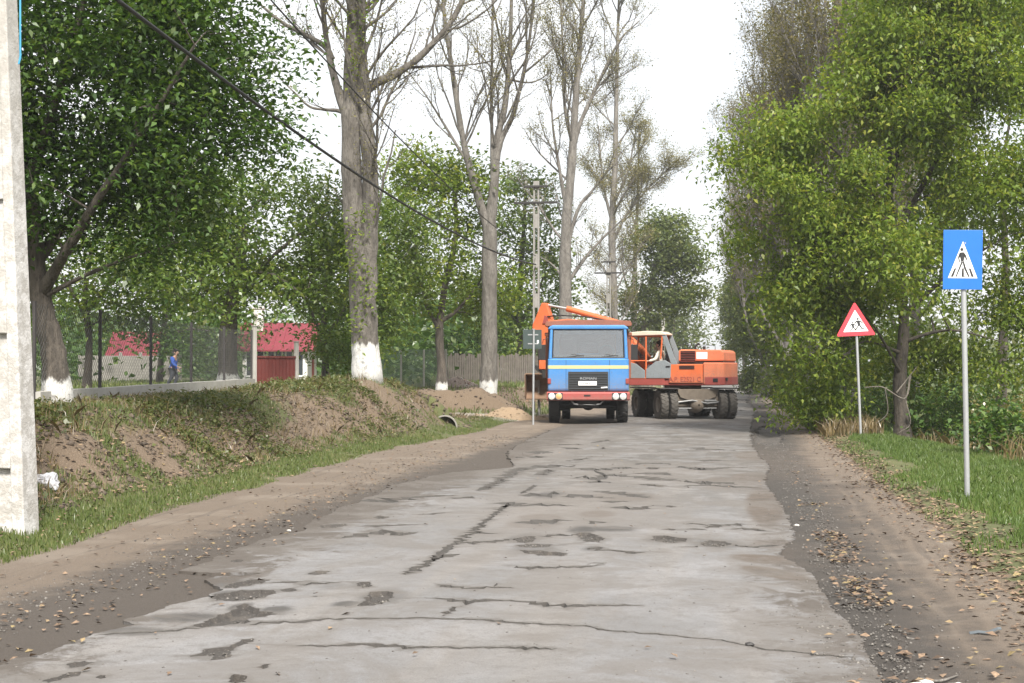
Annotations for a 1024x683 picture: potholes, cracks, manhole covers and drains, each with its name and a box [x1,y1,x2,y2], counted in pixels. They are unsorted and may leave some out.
crack [102,440,847,658]
pothole [651,535,687,543]
pothole [190,638,254,660]
pothole [573,532,605,542]
pothole [210,590,276,601]
pothole [357,591,393,606]
pothole [192,603,275,628]
